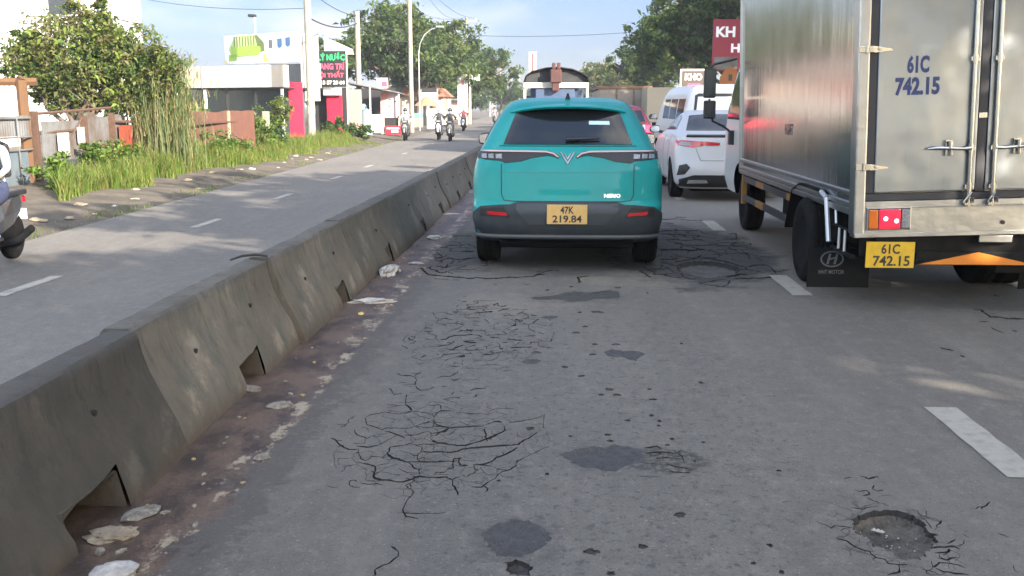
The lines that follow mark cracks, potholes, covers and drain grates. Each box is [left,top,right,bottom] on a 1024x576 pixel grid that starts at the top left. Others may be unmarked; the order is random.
crack [420,237,587,285]
crack [596,217,786,287]
crack [973,309,1023,333]
crack [374,546,399,575]
crack [603,446,697,477]
crack [402,300,552,374]
crack [328,372,550,519]
pothole [851,510,938,560]
